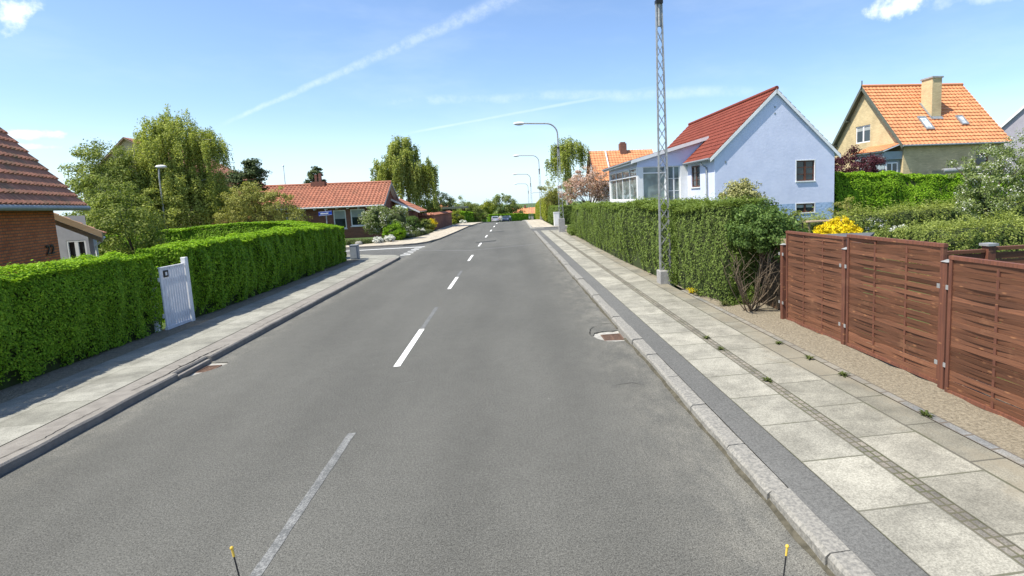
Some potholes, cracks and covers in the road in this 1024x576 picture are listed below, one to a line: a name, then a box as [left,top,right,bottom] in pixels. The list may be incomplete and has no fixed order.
drain grate [594,331,625,341]
drain grate [188,363,227,377]
